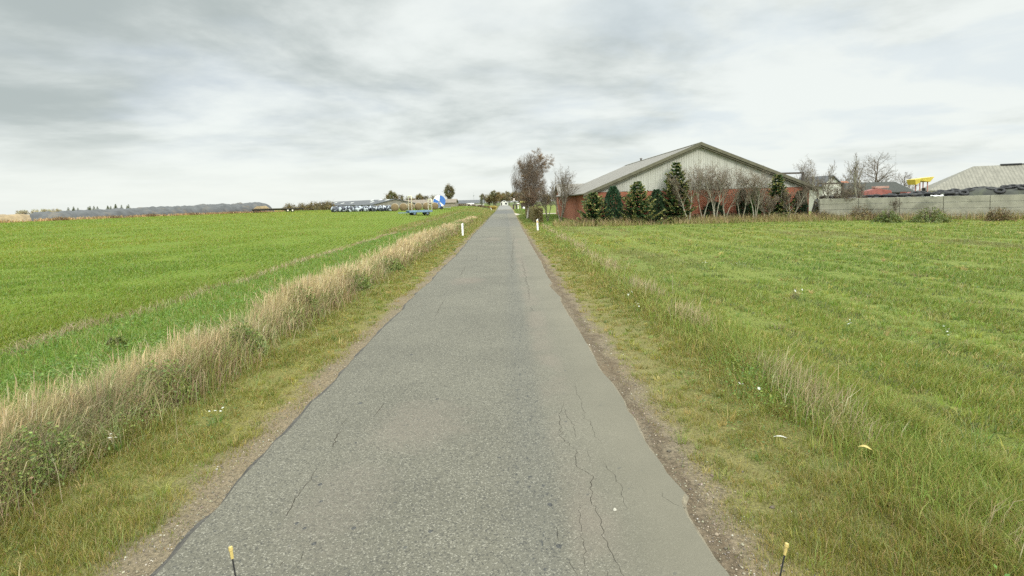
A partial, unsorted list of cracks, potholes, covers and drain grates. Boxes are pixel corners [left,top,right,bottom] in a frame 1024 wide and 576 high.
crack [556,404,626,576]
